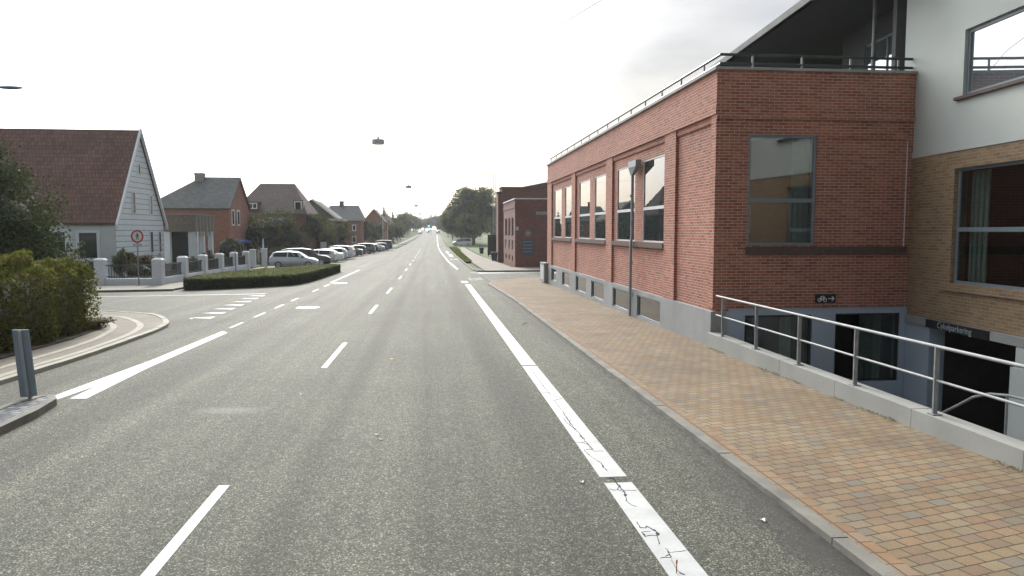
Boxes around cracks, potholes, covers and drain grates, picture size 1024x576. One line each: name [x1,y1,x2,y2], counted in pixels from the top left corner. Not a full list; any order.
crack [532,370,687,575]
